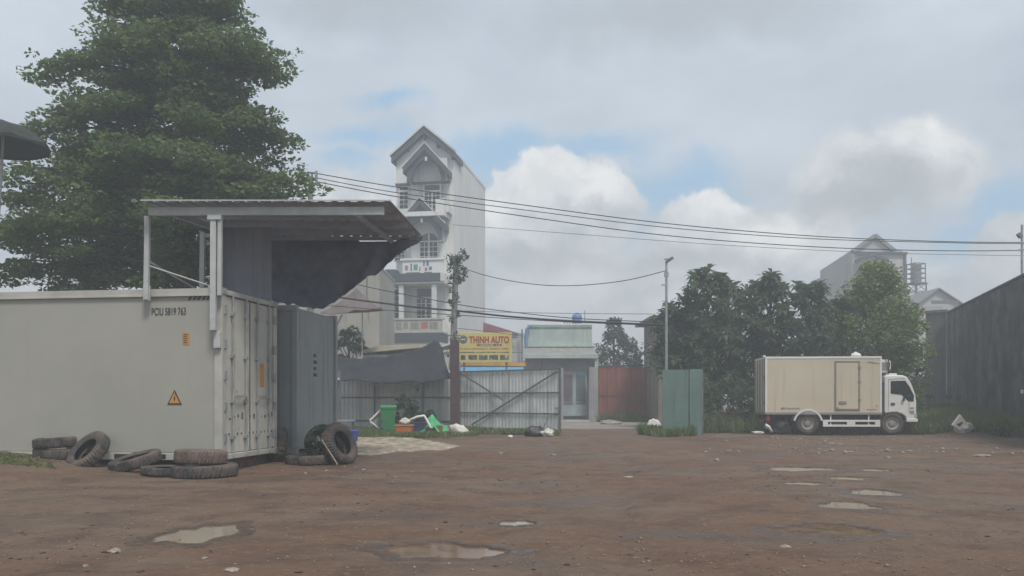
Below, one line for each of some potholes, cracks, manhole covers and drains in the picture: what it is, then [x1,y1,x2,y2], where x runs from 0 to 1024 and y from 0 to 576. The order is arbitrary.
pothole [747,520,913,541]
pothole [834,487,922,499]
pothole [490,519,545,528]
pothole [352,539,536,562]
pothole [124,520,257,549]
pothole [804,499,904,511]
